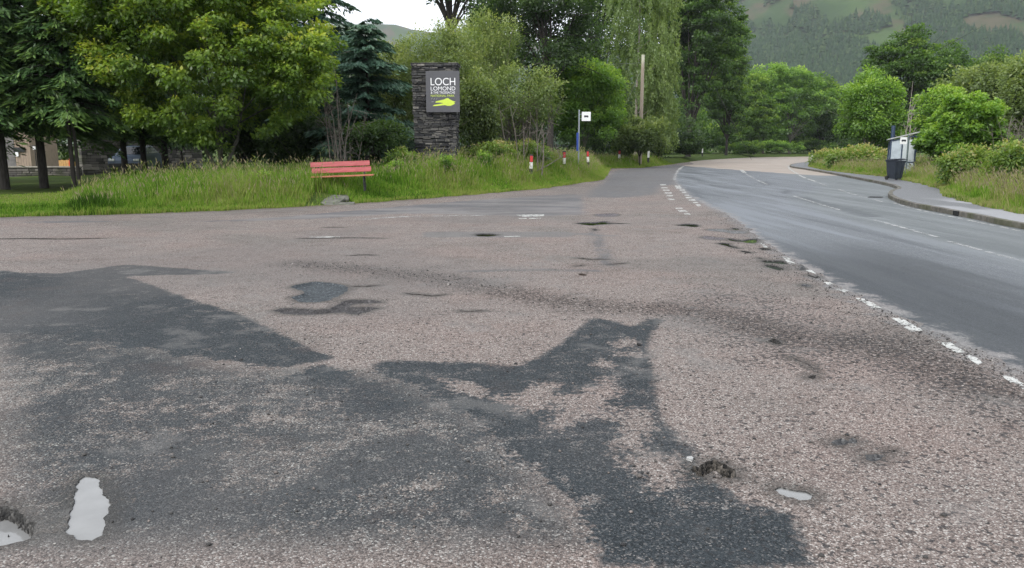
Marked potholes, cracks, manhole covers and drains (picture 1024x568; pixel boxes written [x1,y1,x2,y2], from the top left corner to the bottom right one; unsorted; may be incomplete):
pothole [0,506,36,546]
pothole [691,460,737,478]
pothole [775,487,813,500]
pothole [64,476,111,541]
